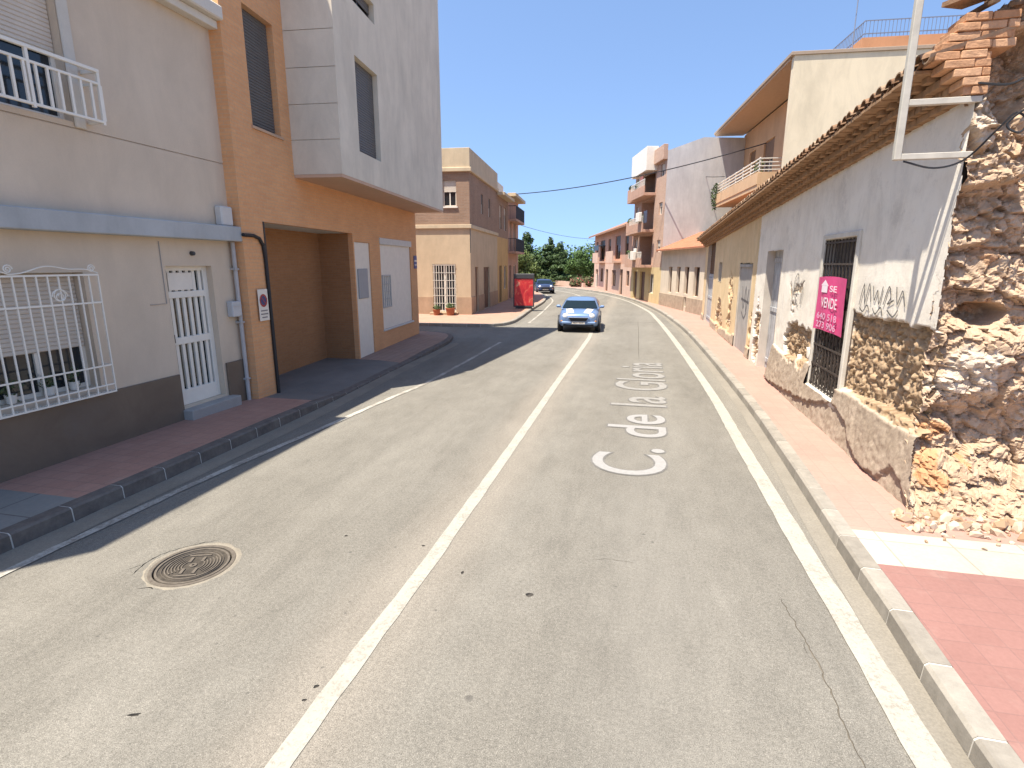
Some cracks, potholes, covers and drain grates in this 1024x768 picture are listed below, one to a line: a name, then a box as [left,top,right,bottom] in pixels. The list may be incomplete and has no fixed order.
manhole cover [141,542,242,590]
crack [778,594,866,768]
